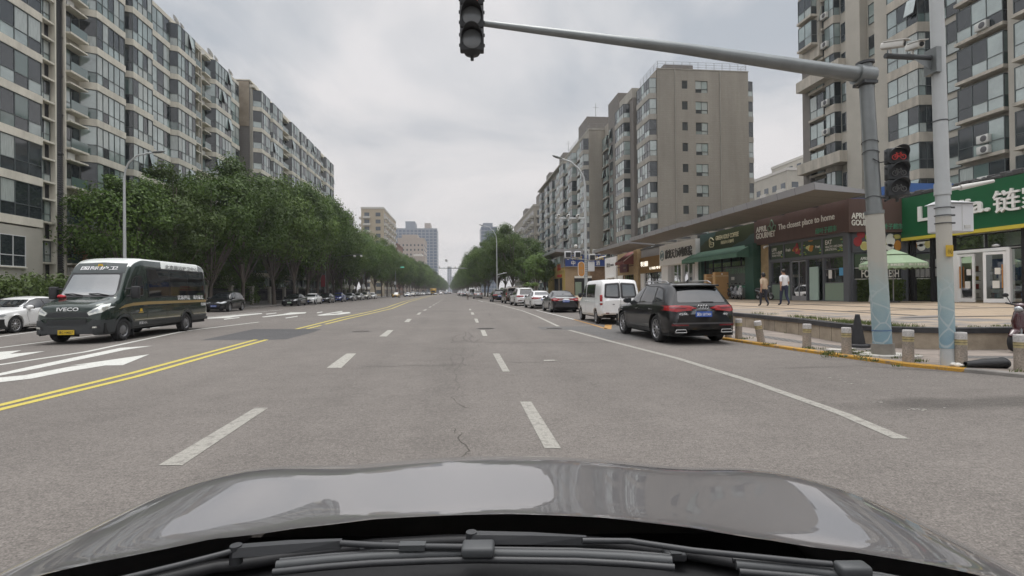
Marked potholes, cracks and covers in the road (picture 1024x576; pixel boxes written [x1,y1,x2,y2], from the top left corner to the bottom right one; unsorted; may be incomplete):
crack [366,317,587,408]
